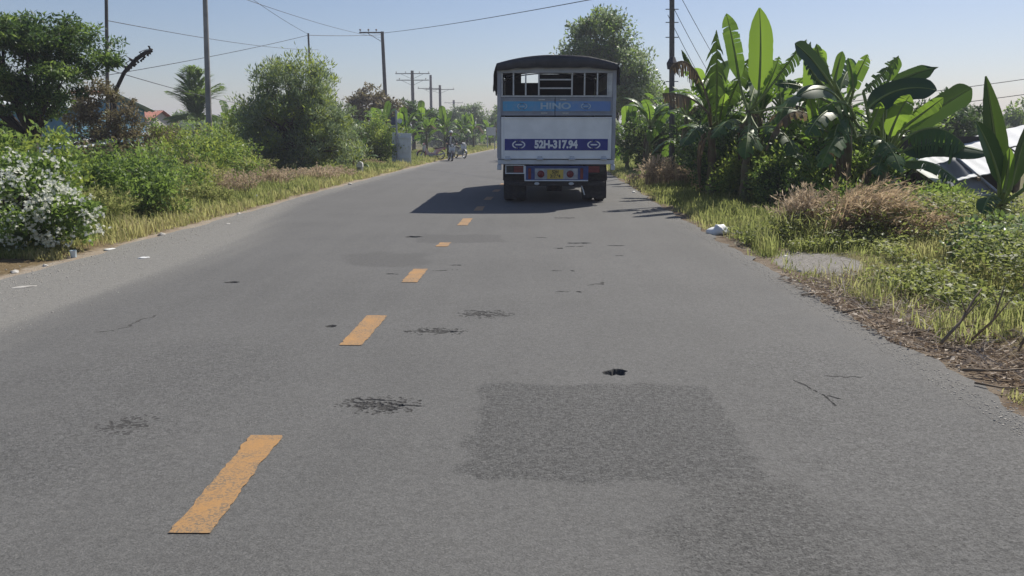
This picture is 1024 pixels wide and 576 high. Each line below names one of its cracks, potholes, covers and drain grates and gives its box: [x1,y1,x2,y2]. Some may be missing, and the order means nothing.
crack [793,375,862,406]
